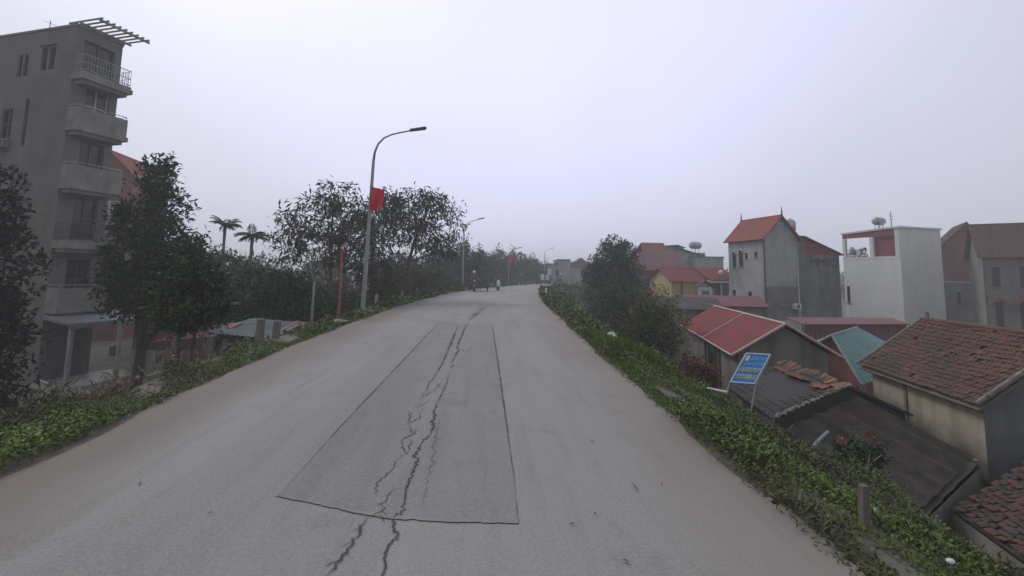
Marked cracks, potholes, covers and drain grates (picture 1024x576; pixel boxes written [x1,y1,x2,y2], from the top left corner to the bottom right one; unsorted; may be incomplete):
crack [325,306,484,576]
